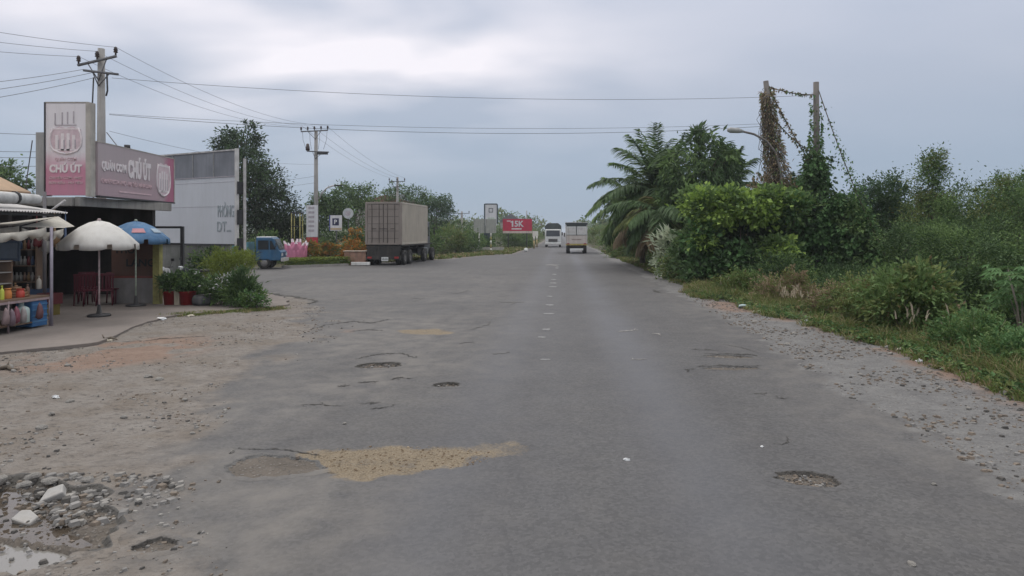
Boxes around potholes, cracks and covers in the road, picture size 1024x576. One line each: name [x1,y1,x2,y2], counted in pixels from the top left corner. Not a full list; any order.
pothole [0,470,135,576]
pothole [761,468,859,492]
pothole [424,381,468,389]
pothole [348,361,409,370]
